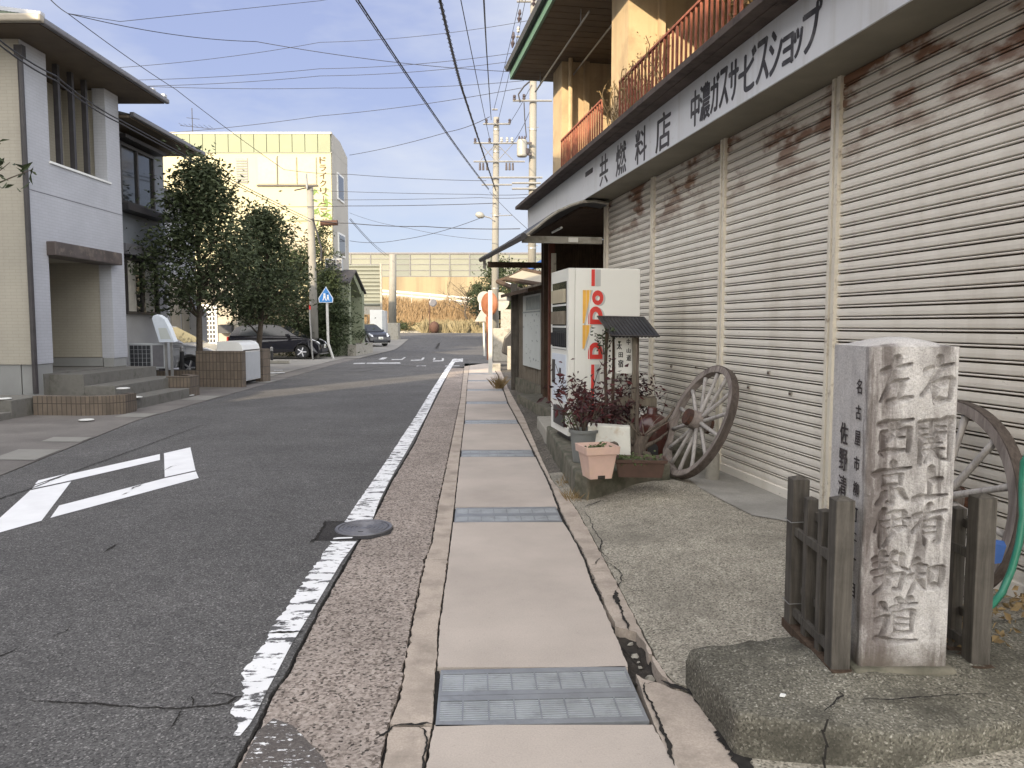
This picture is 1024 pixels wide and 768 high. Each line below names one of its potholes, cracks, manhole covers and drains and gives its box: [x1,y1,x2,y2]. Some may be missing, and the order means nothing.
crack [19,679,272,727]
manhole cover [335,519,393,536]
crack [381,372,469,768]
crack [821,691,982,768]
drain grate [435,666,649,726]
drain grate [454,507,562,522]
